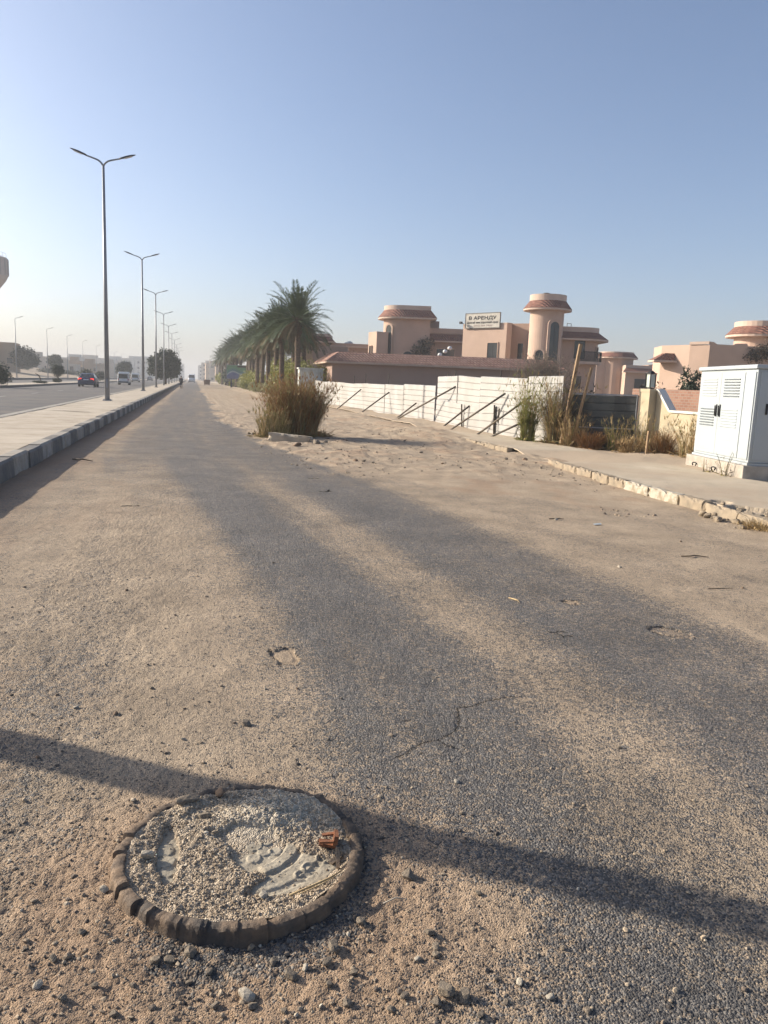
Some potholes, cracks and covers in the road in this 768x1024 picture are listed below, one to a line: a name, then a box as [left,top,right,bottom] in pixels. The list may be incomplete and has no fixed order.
manhole cover [109,784,364,950]
pothole [646,625,695,639]
crack [395,696,513,758]
pothole [267,646,302,667]
